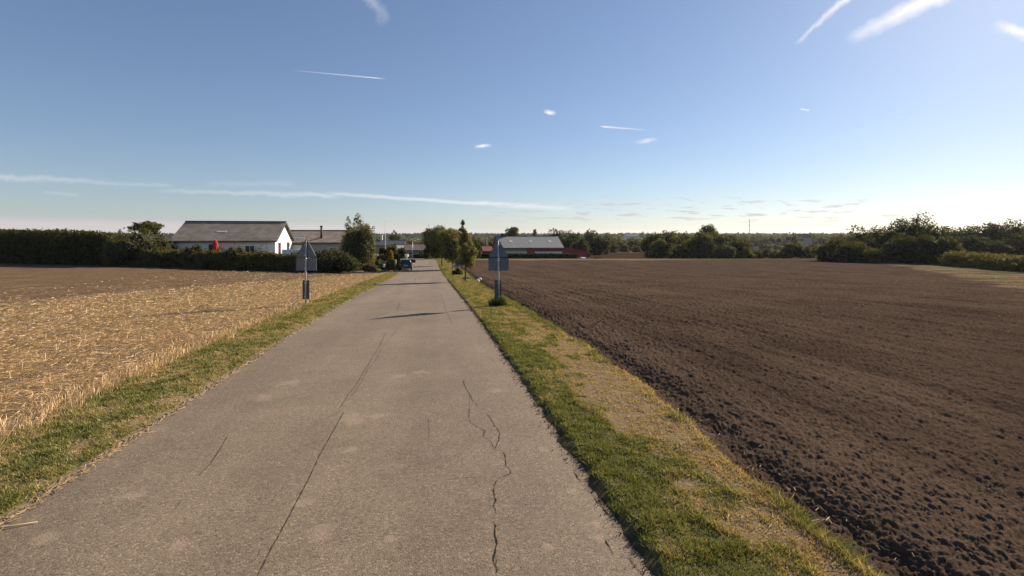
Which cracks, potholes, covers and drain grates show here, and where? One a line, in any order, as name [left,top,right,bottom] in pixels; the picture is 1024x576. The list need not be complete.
crack [463,381,511,573]
